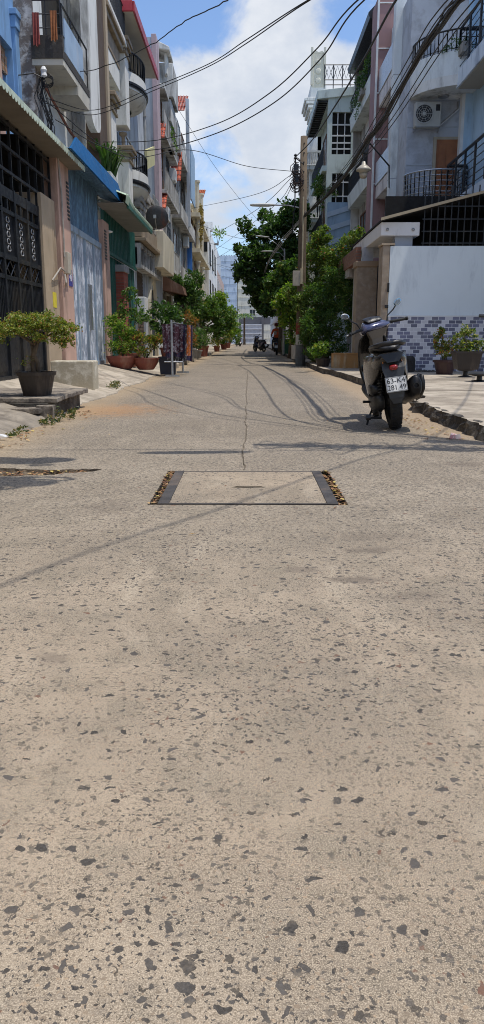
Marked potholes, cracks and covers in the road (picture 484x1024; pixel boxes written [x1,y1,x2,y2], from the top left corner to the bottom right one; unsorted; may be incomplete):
manhole cover [149,471,348,505]
